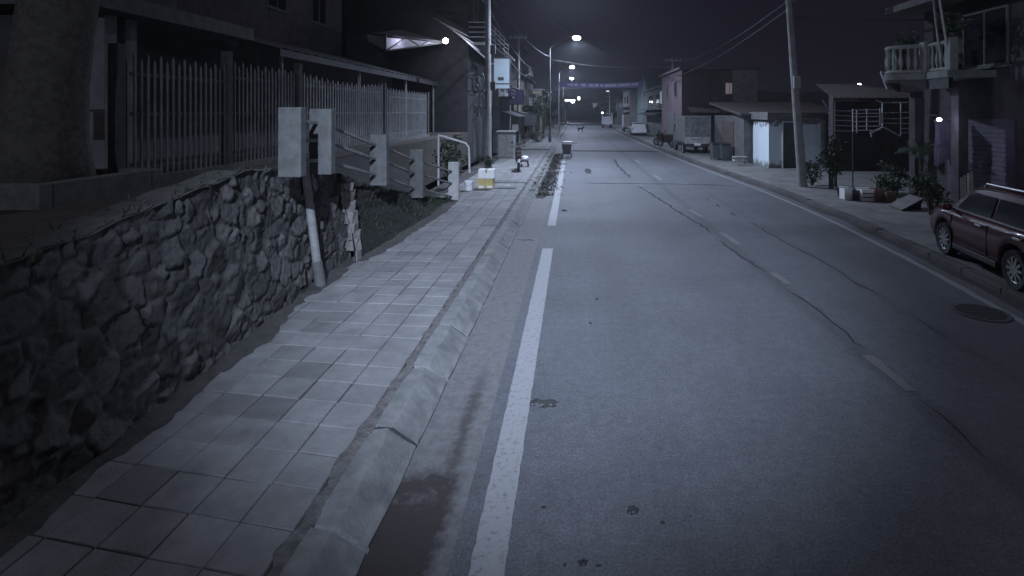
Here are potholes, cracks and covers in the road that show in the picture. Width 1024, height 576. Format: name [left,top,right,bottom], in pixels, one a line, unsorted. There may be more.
crack [591,160,986,459]
manhole cover [950,303,1013,322]
pothole [529,398,558,408]
